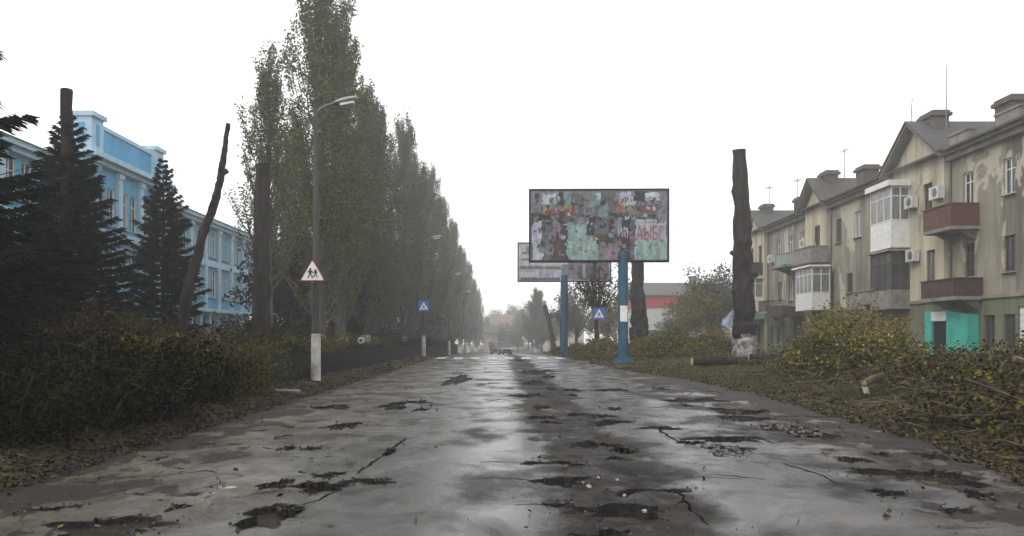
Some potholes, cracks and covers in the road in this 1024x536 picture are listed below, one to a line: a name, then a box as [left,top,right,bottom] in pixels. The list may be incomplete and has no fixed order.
pothole [527,474,601,488]
pothole [609,446,641,454]
pothole [568,439,628,452]
crack [671,475,765,525]
pothole [228,502,306,533]
crack [784,463,837,483]
crack [355,438,406,475]
pothole [751,422,823,438]
pothole [834,454,876,464]
pothole [375,401,409,410]
pothole [317,421,363,430]
pothole [286,477,354,496]
